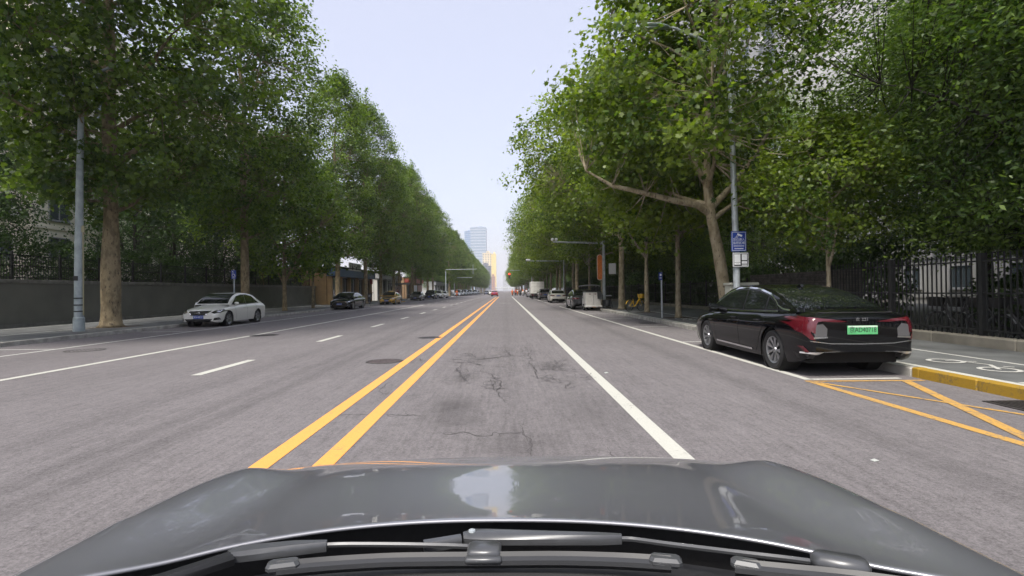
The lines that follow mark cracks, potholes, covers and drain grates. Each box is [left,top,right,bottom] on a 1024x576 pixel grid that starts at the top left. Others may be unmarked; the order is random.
crack [410,343,589,402]
crack [344,412,533,456]
